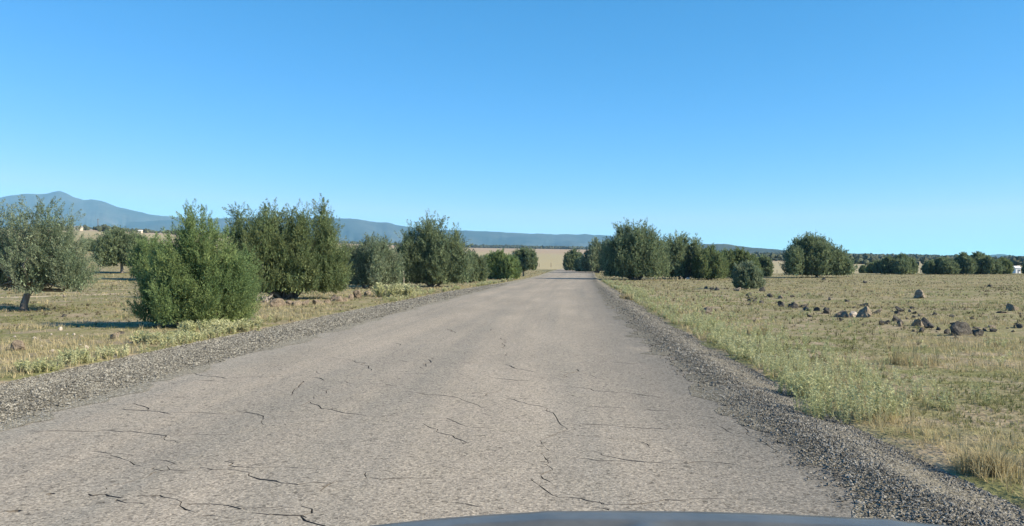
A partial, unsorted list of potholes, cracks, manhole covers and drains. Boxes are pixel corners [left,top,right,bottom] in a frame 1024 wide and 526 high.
crack [340,328,738,510]
crack [291,371,391,416]
crack [88,451,427,526]
